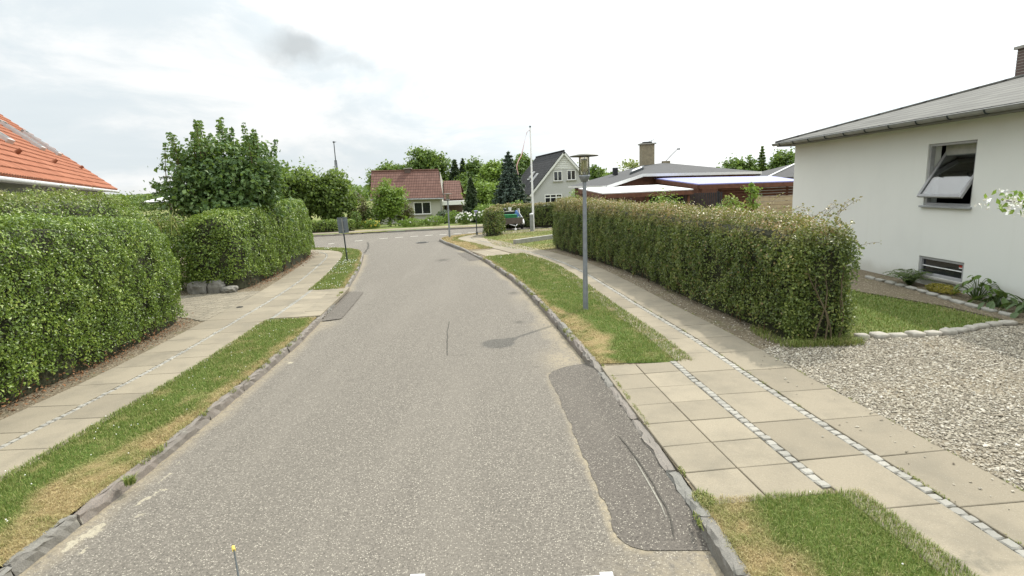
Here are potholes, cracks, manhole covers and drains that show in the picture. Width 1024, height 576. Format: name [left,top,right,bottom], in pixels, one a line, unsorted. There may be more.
crack [619,436,675,540]
